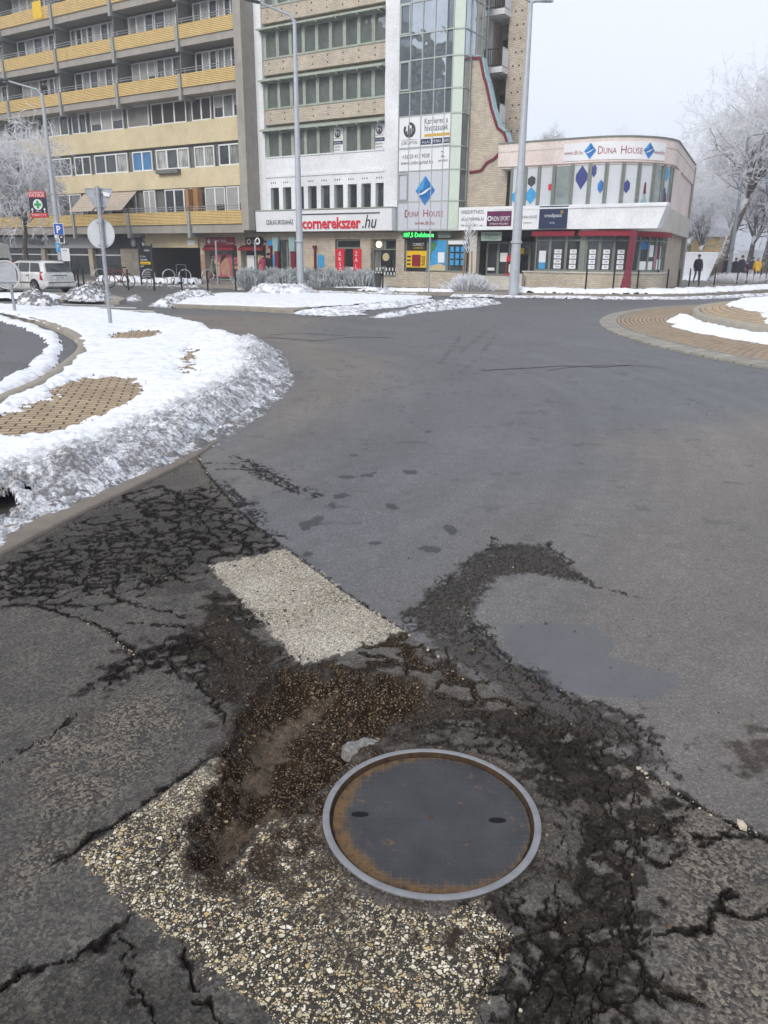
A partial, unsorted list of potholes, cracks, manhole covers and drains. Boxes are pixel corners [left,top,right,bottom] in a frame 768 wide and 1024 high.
crack [181,942,223,1024]
crack [174,667,227,726]
crack [1,914,154,1023]
manhole cover [323,749,541,901]
crack [156,824,186,869]
crack [313,537,768,1024]
